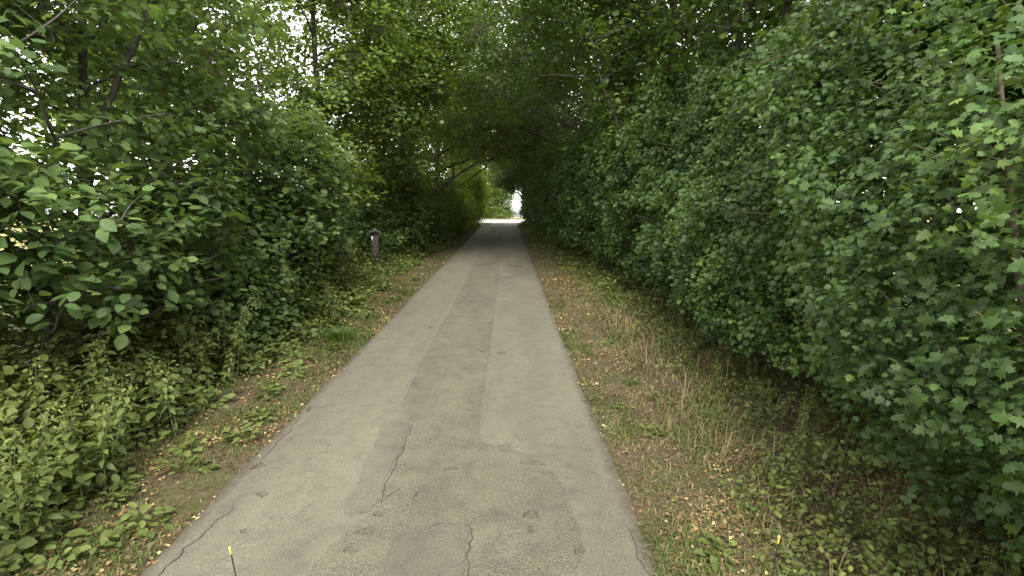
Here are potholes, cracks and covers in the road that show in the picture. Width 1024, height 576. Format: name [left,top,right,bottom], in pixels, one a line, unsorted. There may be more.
crack [414,523,473,576]
crack [381,424,418,503]
crack [158,501,235,576]
